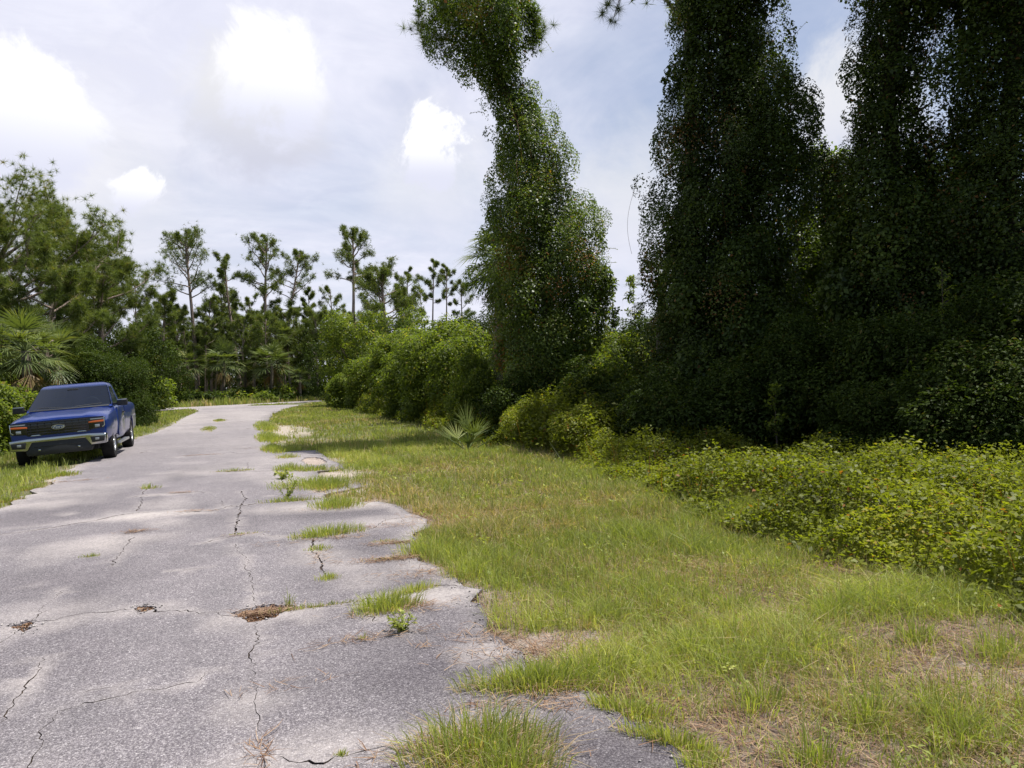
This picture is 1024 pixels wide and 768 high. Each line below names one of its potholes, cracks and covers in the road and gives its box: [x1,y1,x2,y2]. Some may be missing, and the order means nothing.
crack [0,416,412,768]
pothole [231,604,295,623]
